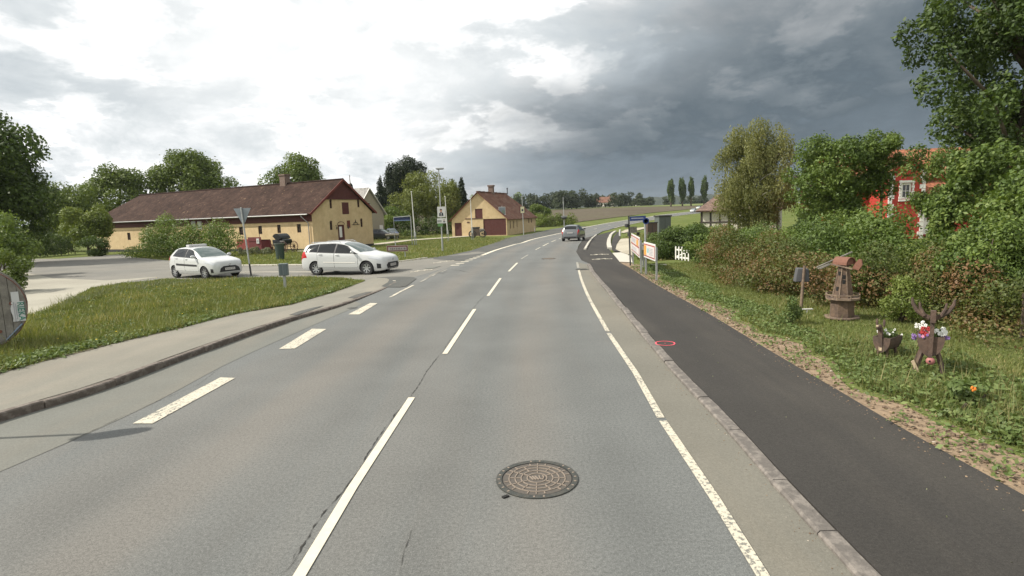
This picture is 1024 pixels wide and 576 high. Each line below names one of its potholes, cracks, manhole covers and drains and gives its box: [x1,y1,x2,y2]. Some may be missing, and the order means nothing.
manhole cover [496,460,578,499]
